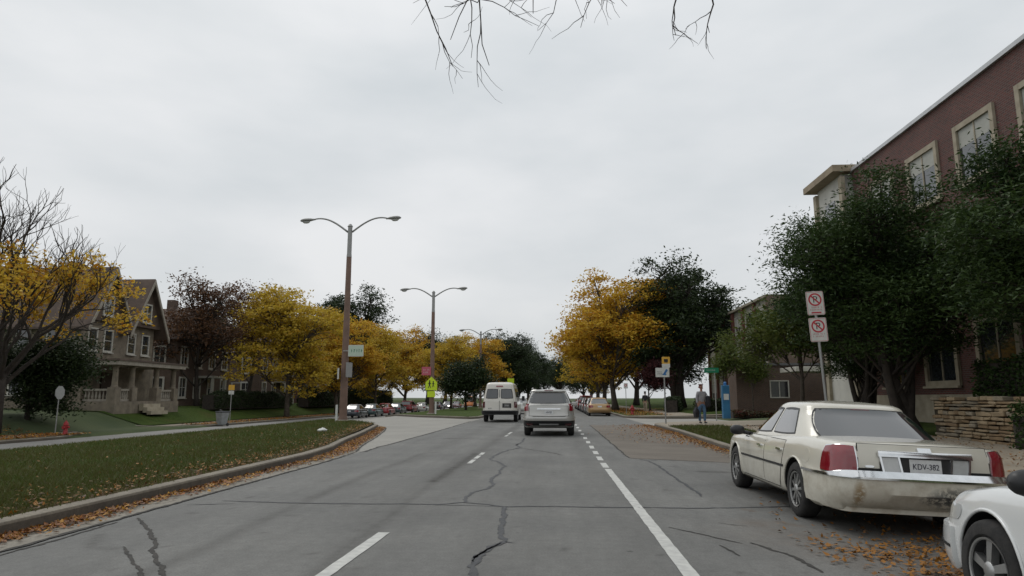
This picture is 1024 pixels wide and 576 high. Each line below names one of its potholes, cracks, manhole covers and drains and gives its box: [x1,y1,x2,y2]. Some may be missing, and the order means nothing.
crack [670,522,823,572]
crack [123,518,166,576]
crack [640,459,702,496]
